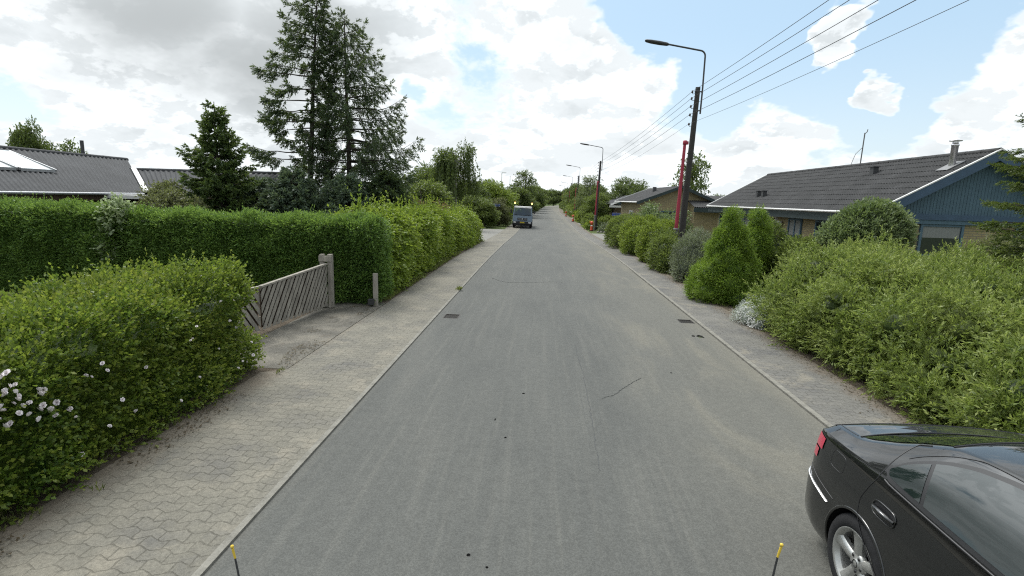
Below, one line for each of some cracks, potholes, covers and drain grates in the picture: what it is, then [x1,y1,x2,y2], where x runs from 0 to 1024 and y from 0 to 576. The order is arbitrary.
crack [575,346,641,470]
